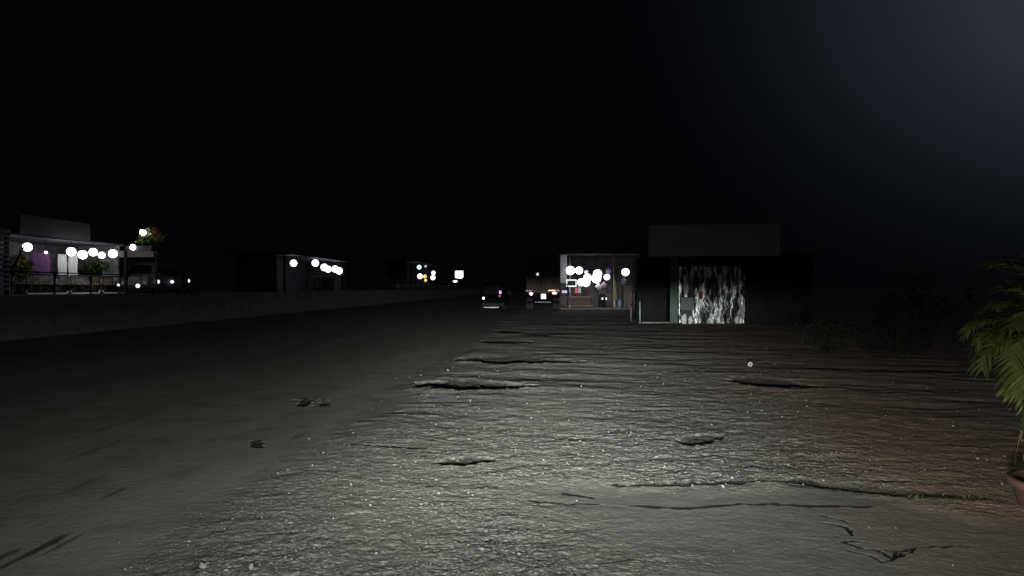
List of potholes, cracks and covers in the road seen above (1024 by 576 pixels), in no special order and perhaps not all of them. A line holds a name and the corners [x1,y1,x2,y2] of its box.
pothole [451,354,590,364]
pothole [290,396,317,407]
pothole [404,377,544,391]
crack [527,479,978,563]
pothole [671,433,730,447]
pothole [249,438,268,448]
pothole [433,454,504,466]
pothole [718,374,834,389]
